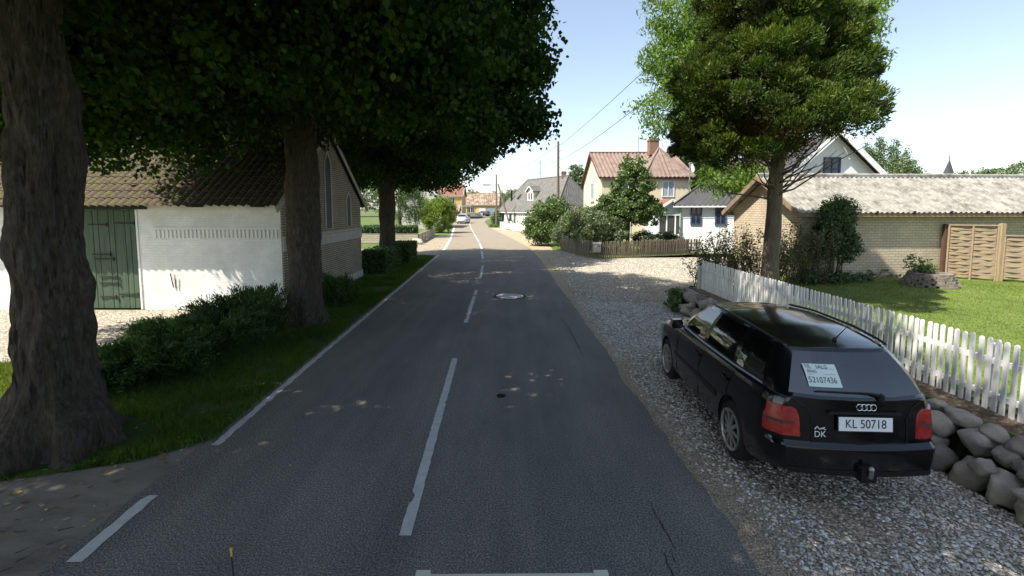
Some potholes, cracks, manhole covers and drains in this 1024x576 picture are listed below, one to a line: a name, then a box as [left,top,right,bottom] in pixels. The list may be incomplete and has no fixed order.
crack [650,502,677,576]
